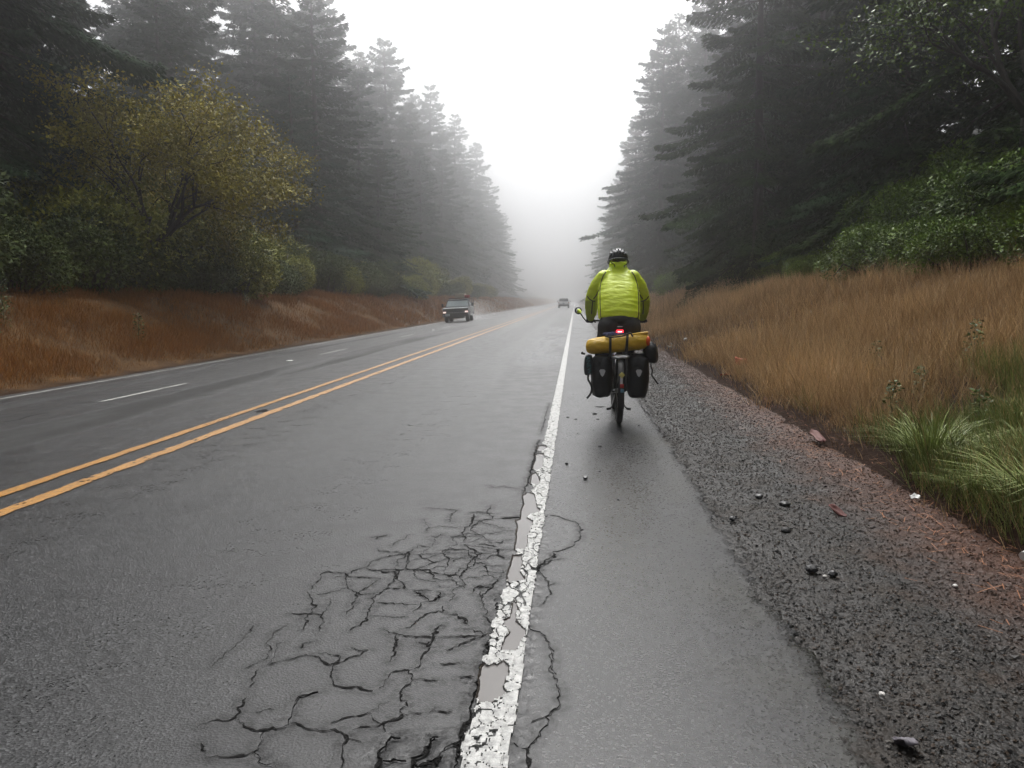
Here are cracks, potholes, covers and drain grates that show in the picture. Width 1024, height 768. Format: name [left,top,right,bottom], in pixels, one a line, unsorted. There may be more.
pothole [514,492,541,550]
pothole [506,554,526,584]
pothole [532,453,544,470]
pothole [475,659,510,704]
pothole [496,601,526,651]
crack [514,629,561,768]
crack [527,515,584,603]
crack [201,507,520,768]
